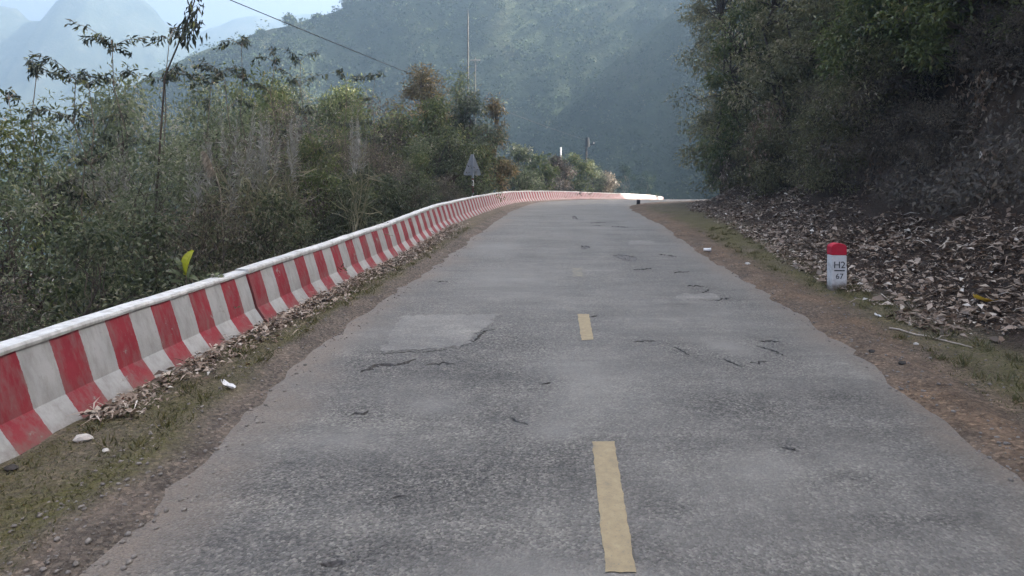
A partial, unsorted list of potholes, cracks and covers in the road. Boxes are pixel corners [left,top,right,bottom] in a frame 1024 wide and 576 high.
crack [360,349,455,373]
crack [724,340,784,367]
